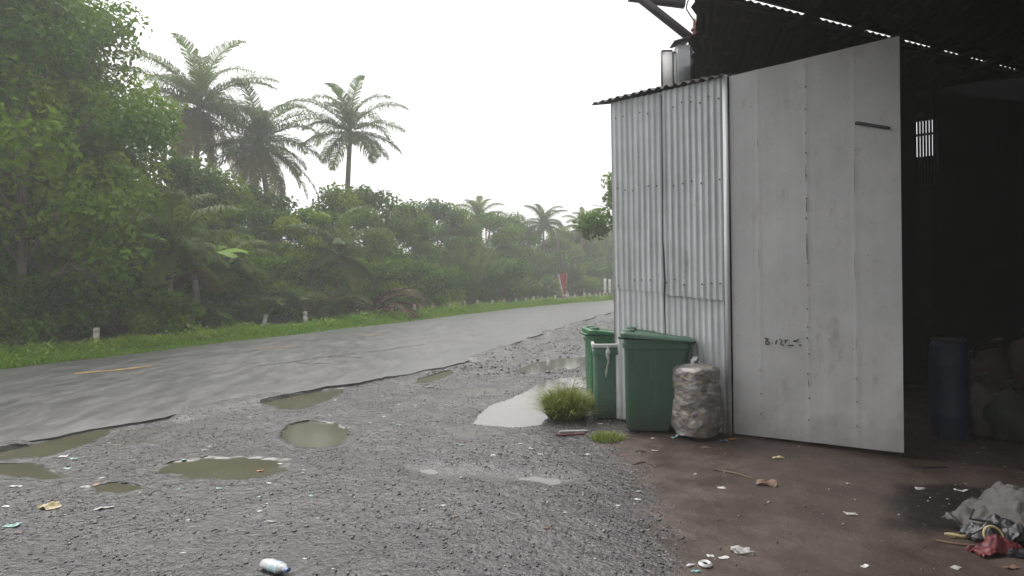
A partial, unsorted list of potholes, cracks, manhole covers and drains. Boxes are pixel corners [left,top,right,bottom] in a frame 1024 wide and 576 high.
pothole [246,386,351,411]
pothole [0,426,125,463]
pothole [265,418,362,451]
pothole [73,477,162,499]
pothole [131,452,309,485]
pothole [0,457,84,483]
pothole [405,368,458,386]
